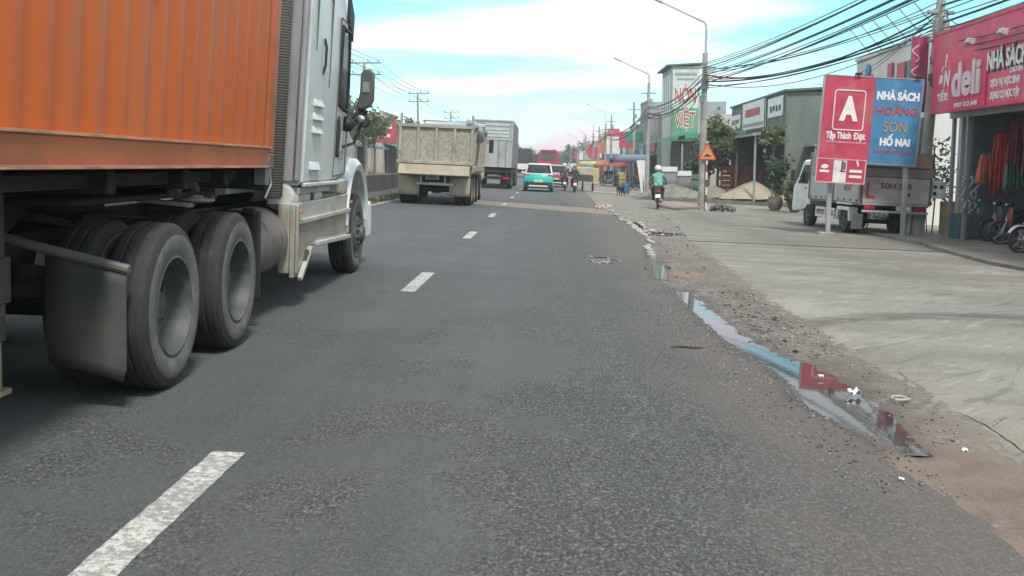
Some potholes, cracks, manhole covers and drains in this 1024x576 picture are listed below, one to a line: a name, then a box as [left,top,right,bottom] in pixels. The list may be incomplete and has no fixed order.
pothole [587,256,621,264]
crack [967,416,1024,452]
